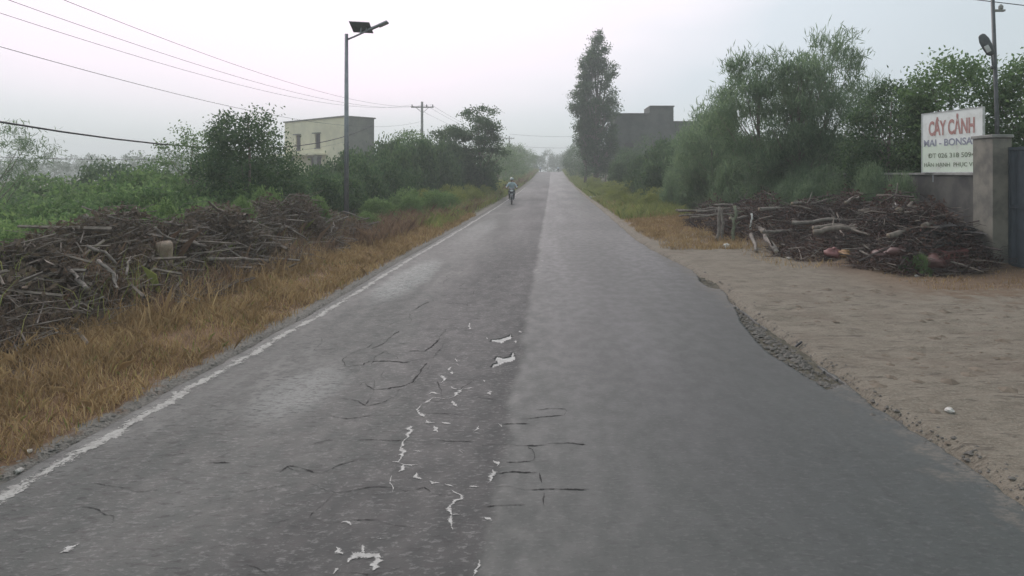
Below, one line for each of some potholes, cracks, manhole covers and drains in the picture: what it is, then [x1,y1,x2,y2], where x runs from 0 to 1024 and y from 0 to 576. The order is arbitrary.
pothole [735,308,841,390]
crack [68,276,586,576]
pothole [699,277,720,289]
